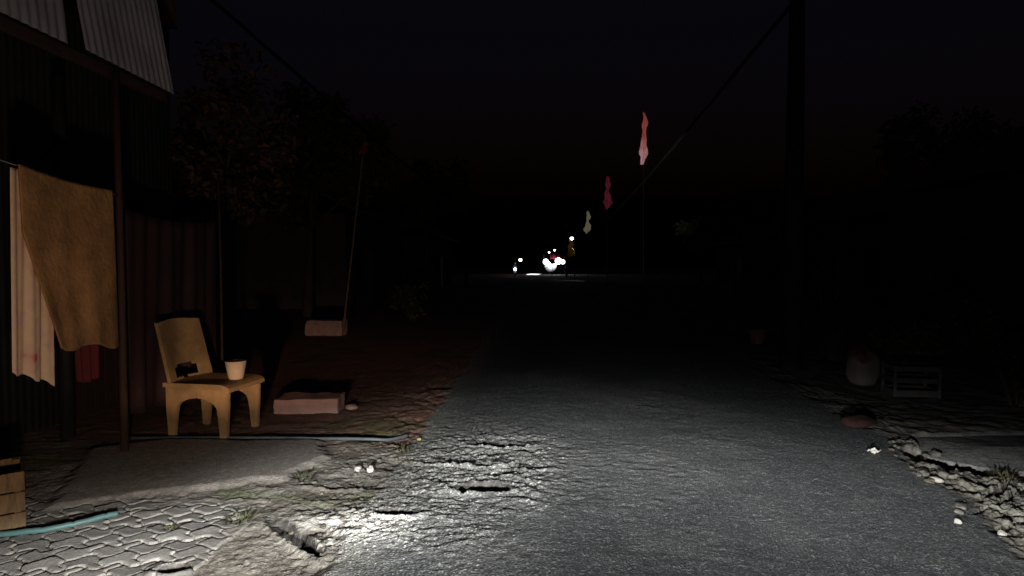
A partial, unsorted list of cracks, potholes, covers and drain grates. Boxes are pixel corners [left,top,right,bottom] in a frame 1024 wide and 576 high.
pothole [374,506,420,515]
pothole [468,440,531,448]
pothole [262,516,324,557]
pothole [448,480,523,493]
